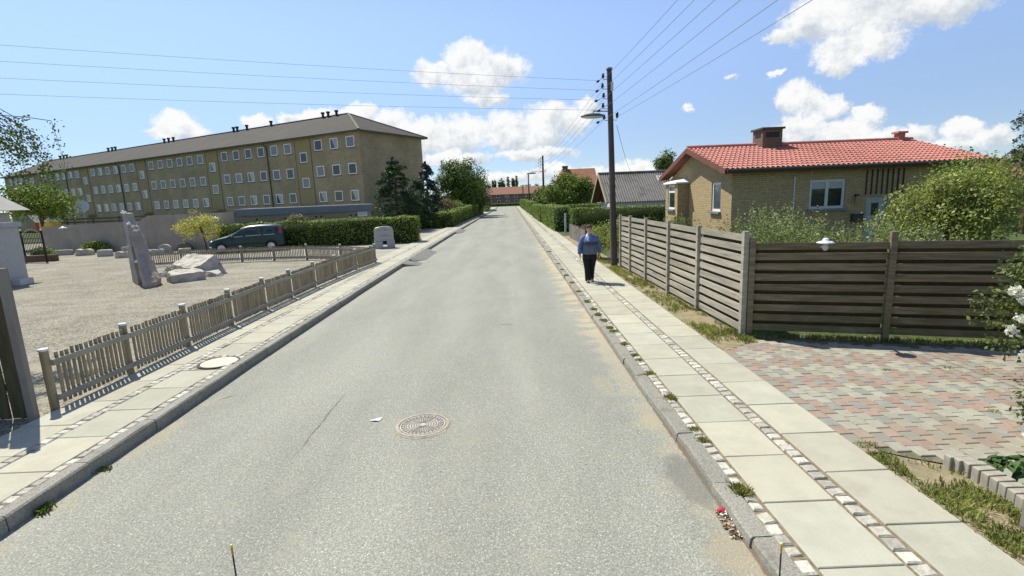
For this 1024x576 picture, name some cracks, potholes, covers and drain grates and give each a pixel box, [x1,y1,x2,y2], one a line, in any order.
manhole cover [394,413,451,439]
manhole cover [197,356,240,370]
